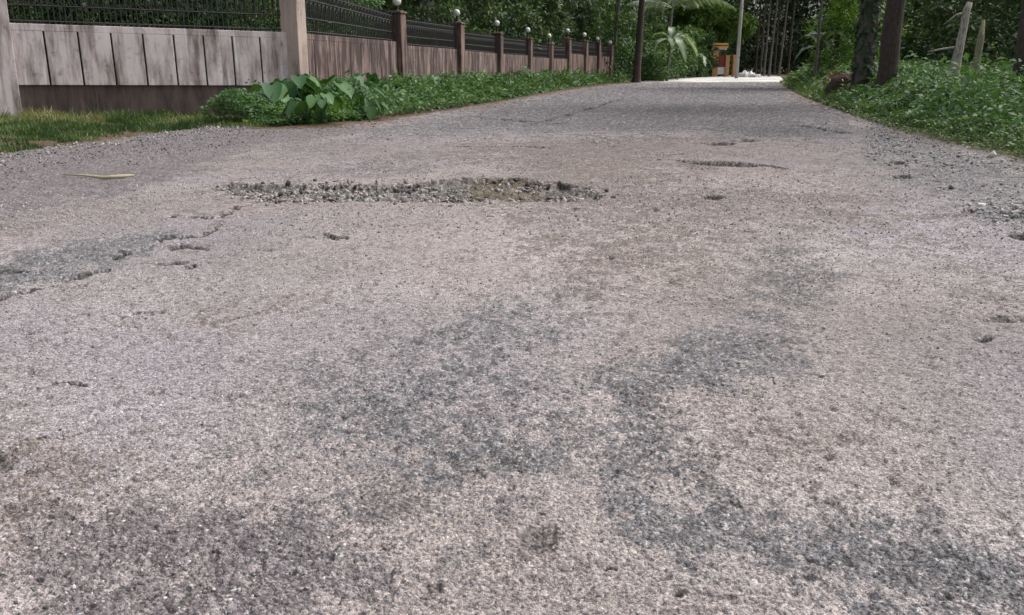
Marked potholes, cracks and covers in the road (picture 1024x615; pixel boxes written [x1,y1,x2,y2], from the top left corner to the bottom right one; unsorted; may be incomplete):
crack [0,204,250,322]
pothole [685,159,758,167]
pothole [505,517,570,558]
pothole [972,335,996,343]
crack [473,98,624,125]
pothole [975,314,1024,323]
pothole [209,174,619,207]
